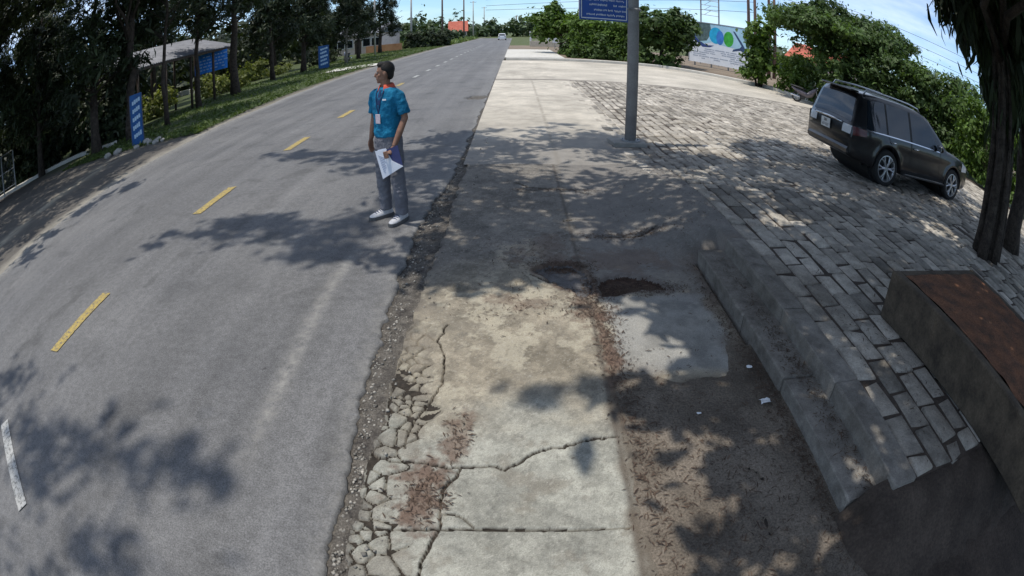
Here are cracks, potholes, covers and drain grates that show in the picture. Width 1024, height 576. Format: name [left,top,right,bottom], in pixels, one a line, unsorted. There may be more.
crack [348,325,629,576]
pothole [533,265,593,299]
pothole [598,277,668,297]
